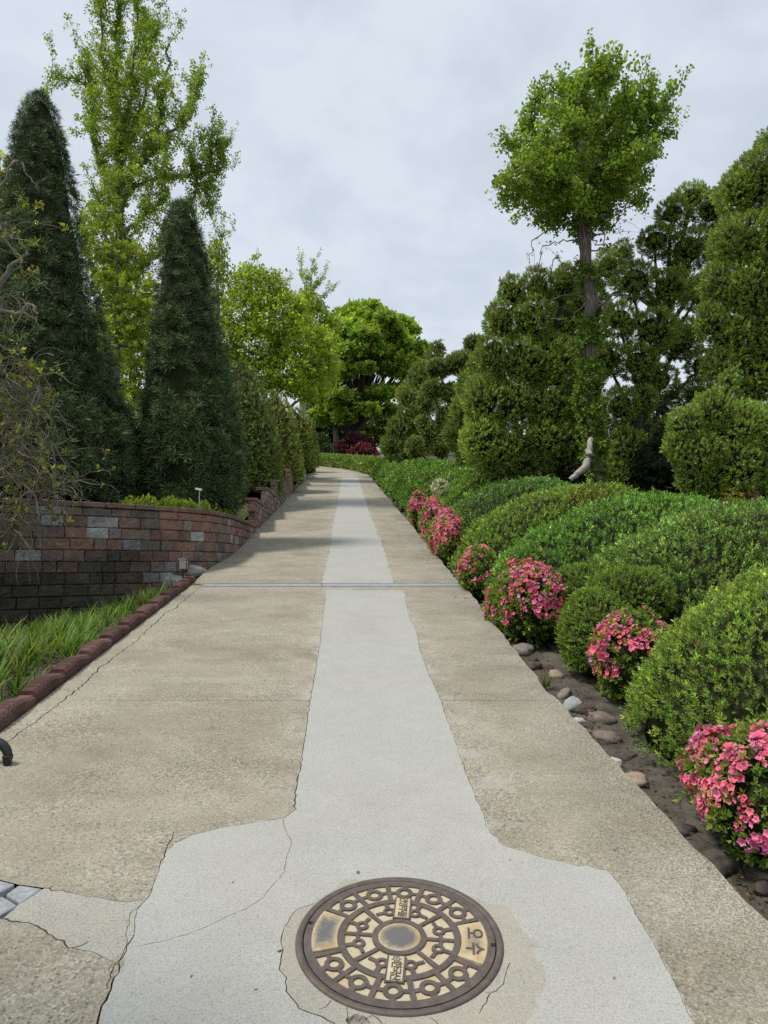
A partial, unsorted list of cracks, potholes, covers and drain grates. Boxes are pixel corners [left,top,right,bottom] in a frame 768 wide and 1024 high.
manhole cover [295,877,504,1017]
crack [0,600,326,1024]
